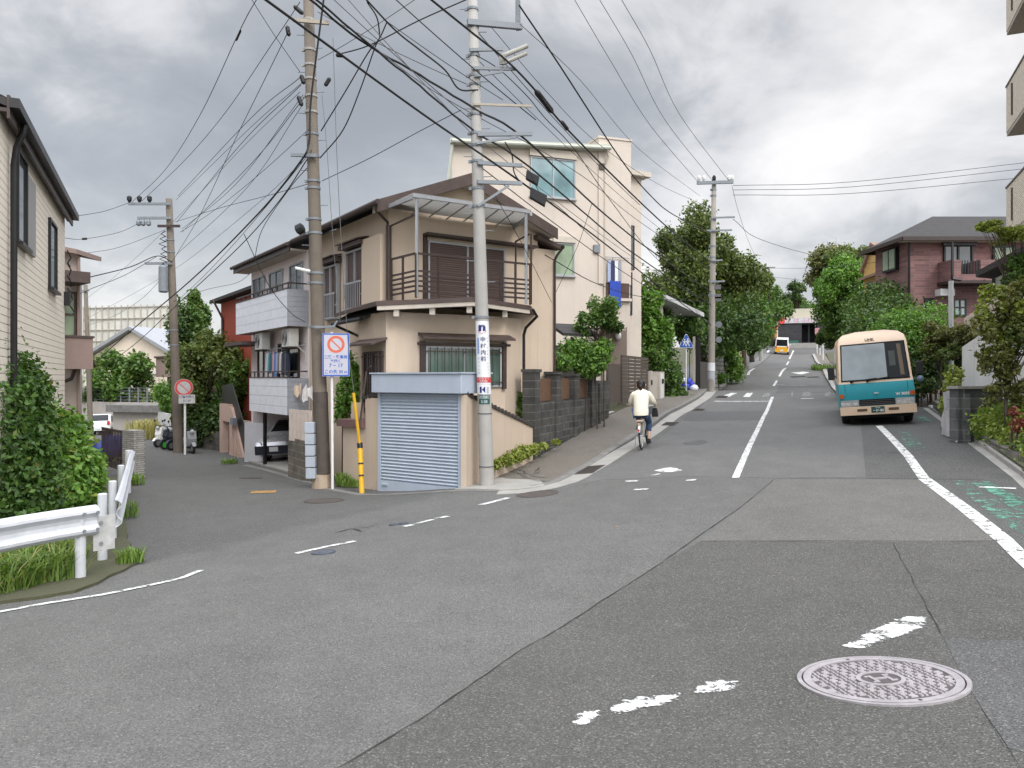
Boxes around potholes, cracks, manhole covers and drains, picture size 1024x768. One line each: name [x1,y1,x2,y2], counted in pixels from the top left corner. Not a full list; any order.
crack [893,544,942,635]
manhole cover [797,656,973,707]
drain grate [574,465,605,475]
manhole cover [516,490,559,498]
